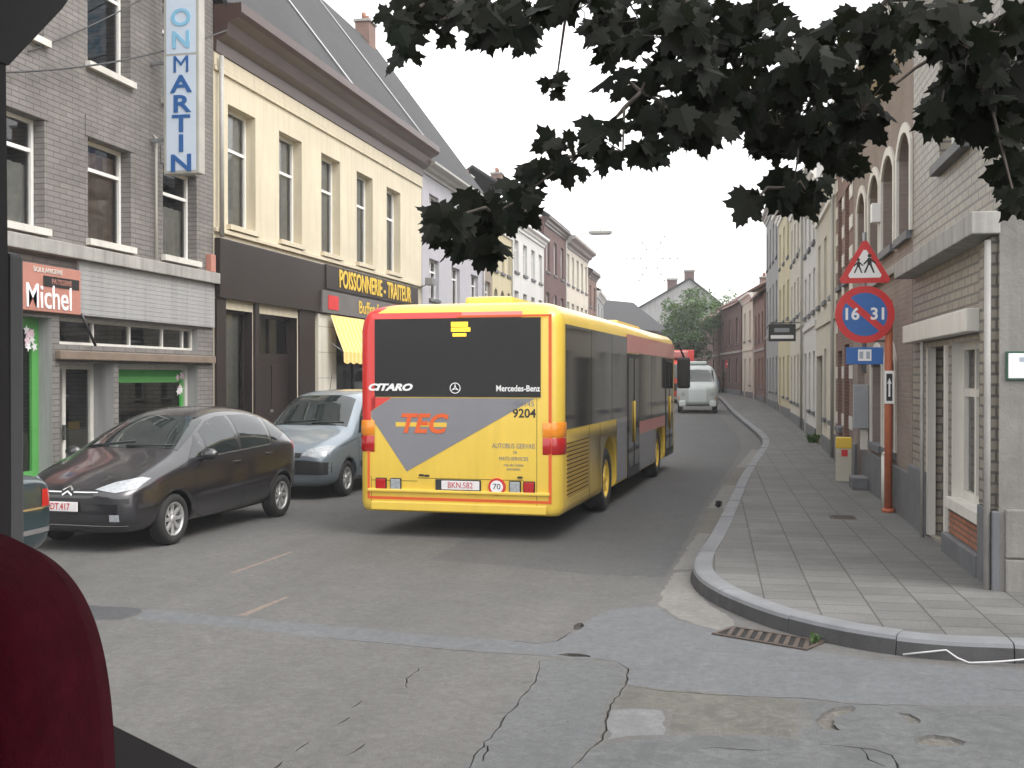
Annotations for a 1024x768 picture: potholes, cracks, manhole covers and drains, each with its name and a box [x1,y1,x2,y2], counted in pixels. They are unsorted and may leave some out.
crack [571,658,917,768]
crack [328,633,569,768]
pothole [815,706,856,730]
pothole [899,713,921,723]
drain grate [712,626,826,651]
pothole [914,735,966,746]
